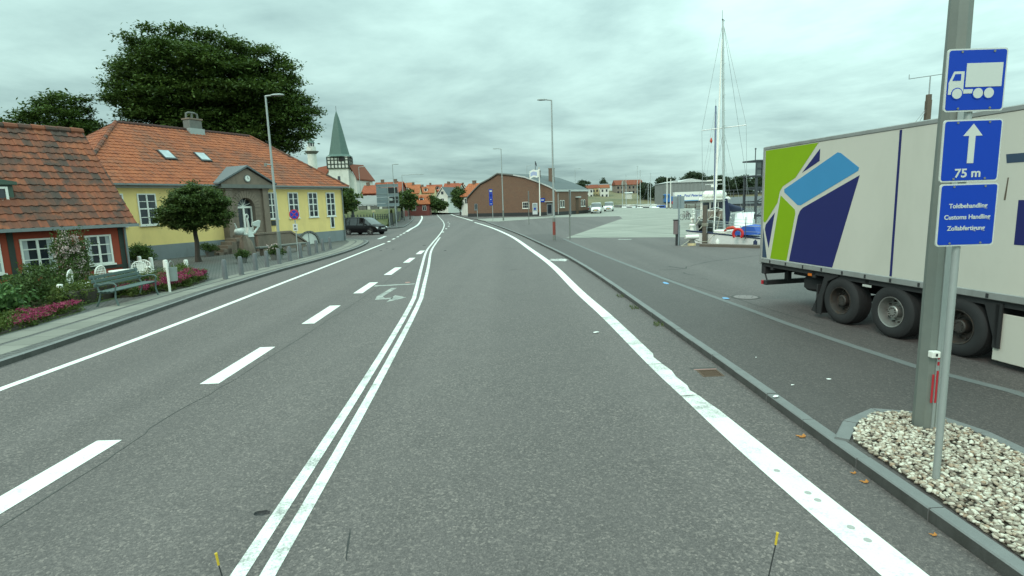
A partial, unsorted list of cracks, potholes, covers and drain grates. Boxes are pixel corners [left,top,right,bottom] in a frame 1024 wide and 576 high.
drain grate [696,369,724,377]
